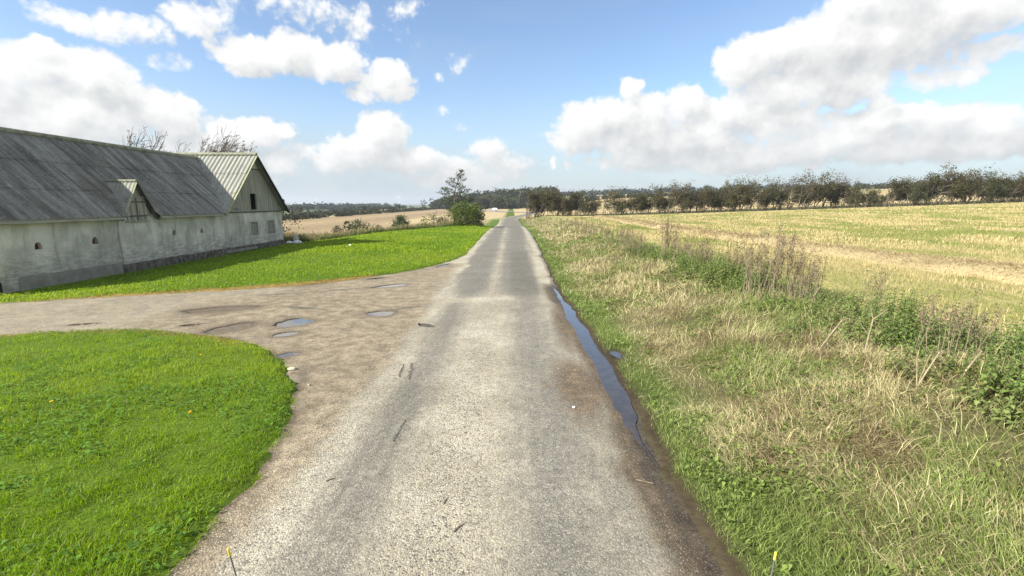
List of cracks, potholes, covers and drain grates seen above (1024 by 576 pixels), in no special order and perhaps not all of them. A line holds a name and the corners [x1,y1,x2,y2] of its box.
pothole [273,318,314,327]
pothole [203,322,255,334]
